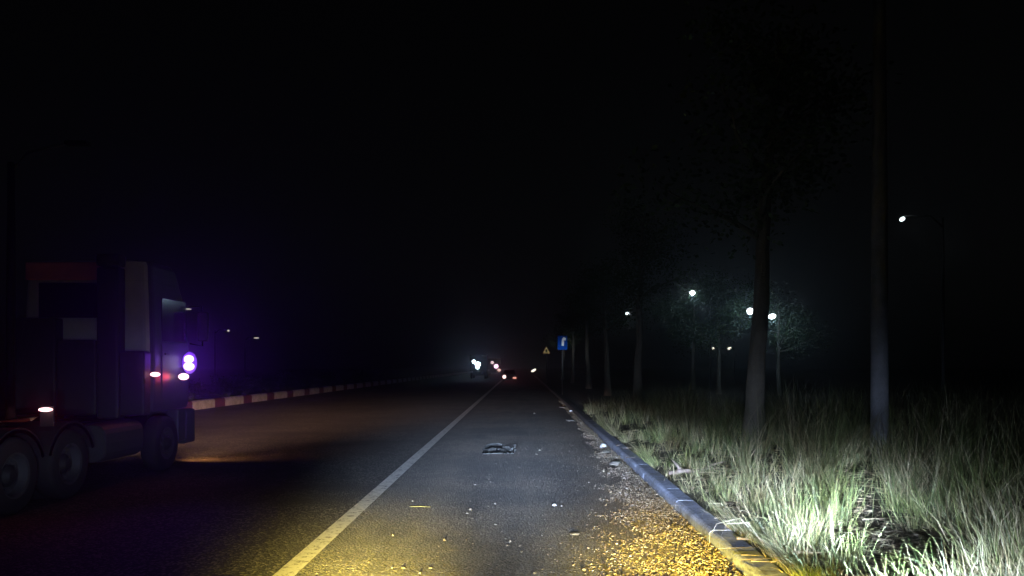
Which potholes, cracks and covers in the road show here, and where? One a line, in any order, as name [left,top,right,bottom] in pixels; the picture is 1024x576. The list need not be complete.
pothole [482,443,517,455]
